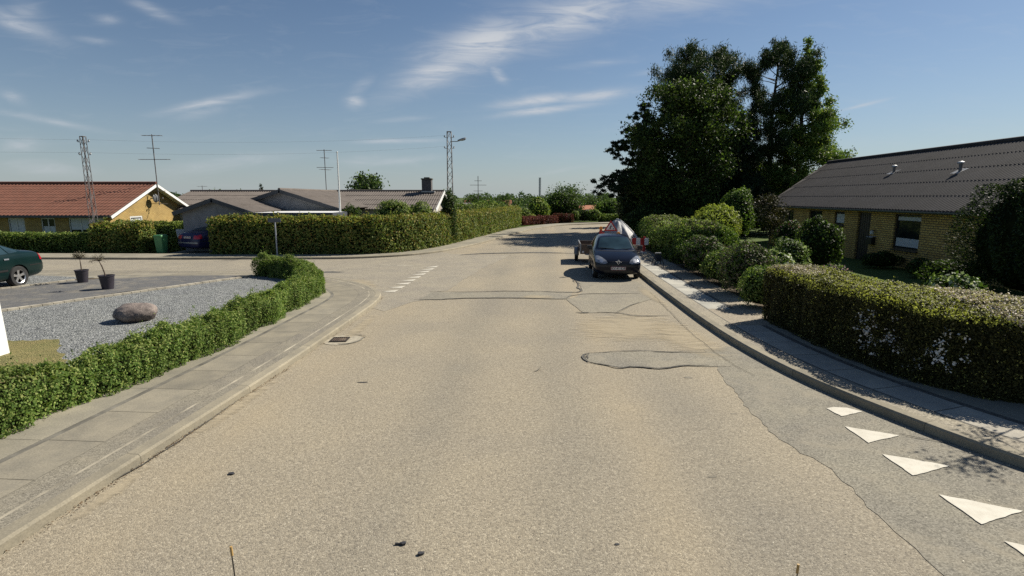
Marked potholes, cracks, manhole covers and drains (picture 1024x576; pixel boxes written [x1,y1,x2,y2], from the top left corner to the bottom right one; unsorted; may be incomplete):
drain grate [324,335,364,345]
